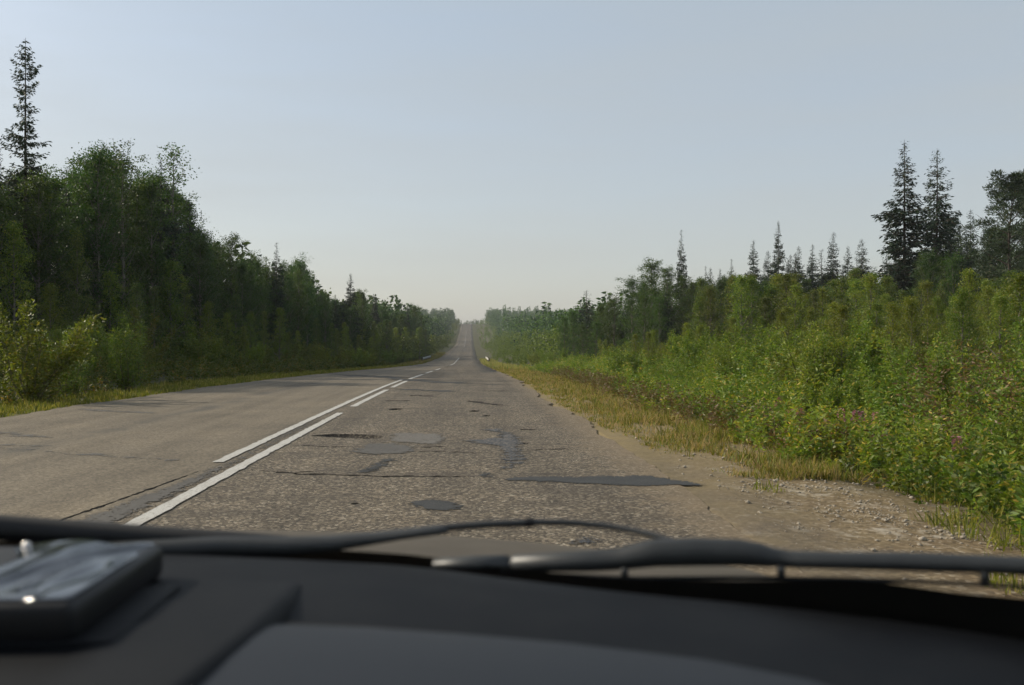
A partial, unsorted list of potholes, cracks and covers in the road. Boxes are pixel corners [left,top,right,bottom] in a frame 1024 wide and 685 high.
crack [259,470,469,478]
